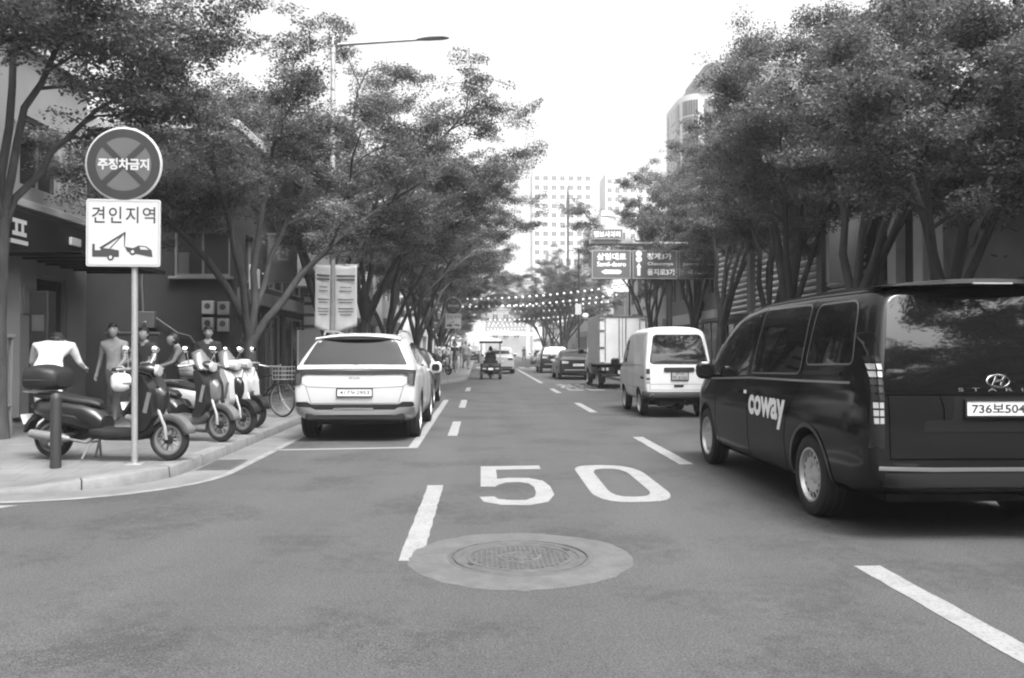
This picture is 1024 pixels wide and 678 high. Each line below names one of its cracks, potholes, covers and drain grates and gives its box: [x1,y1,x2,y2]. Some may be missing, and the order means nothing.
manhole cover [407,533,634,591]
